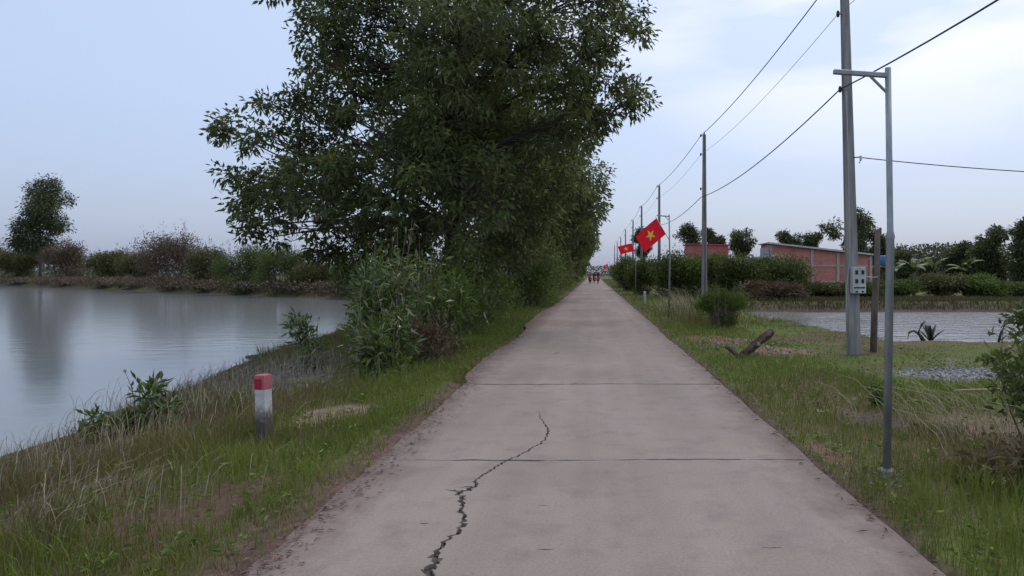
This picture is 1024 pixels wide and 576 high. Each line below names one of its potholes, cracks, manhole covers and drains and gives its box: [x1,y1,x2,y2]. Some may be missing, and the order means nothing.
crack [423,417,549,576]
